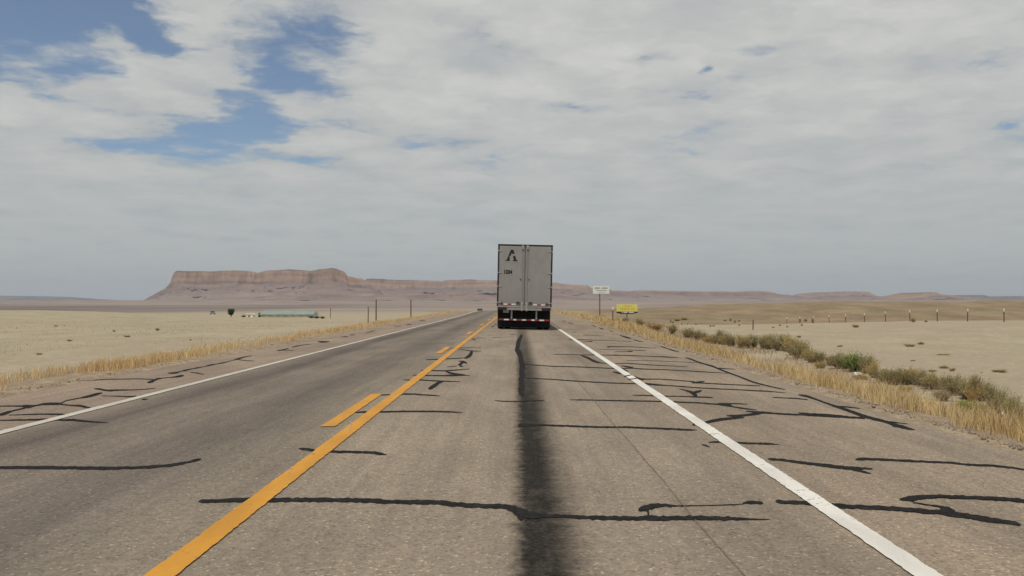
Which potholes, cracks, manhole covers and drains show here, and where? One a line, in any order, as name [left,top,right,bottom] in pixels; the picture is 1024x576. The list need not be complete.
crack [425,338,475,376]
crack [0,355,252,423]
